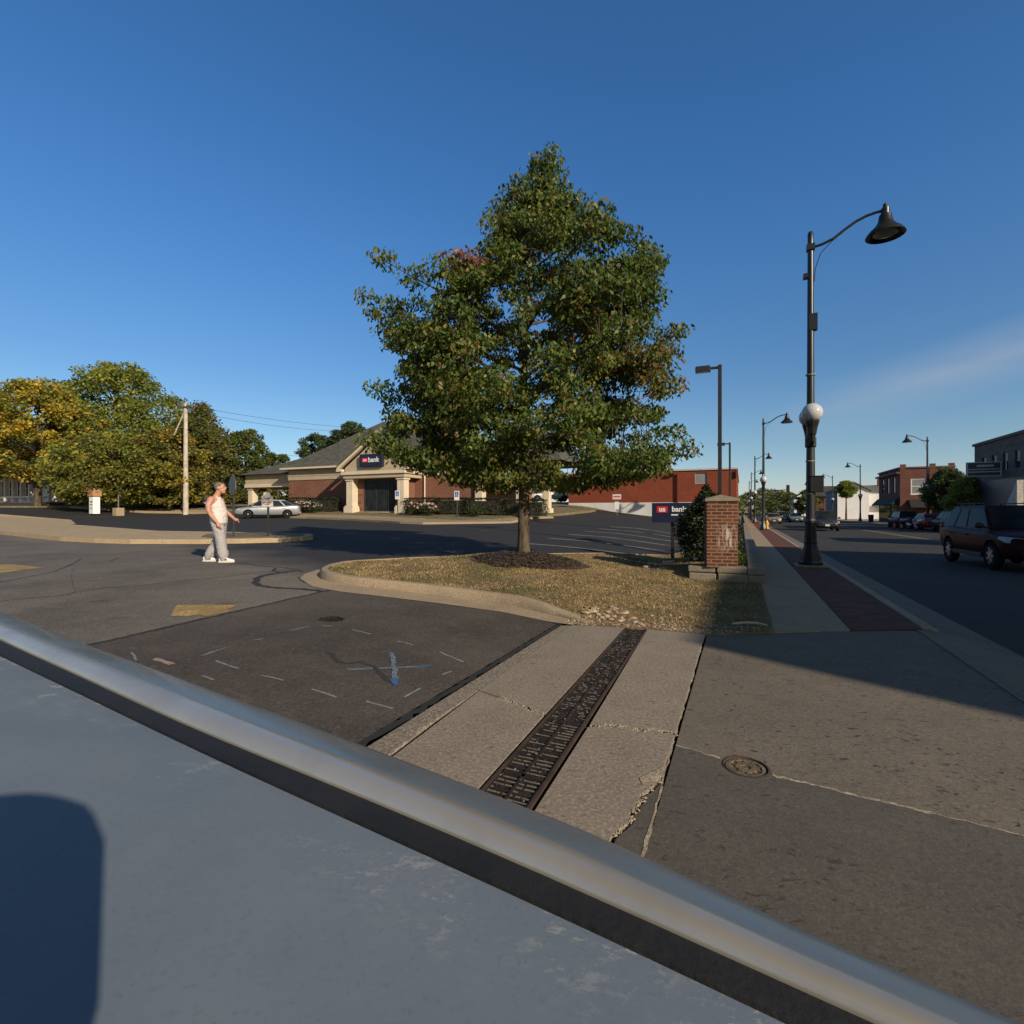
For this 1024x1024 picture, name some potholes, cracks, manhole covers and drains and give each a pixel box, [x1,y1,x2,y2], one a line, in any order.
crack [589,723,678,737]
crack [613,778,665,840]
crack [499,697,547,717]
manhole cover [721,756,771,779]
